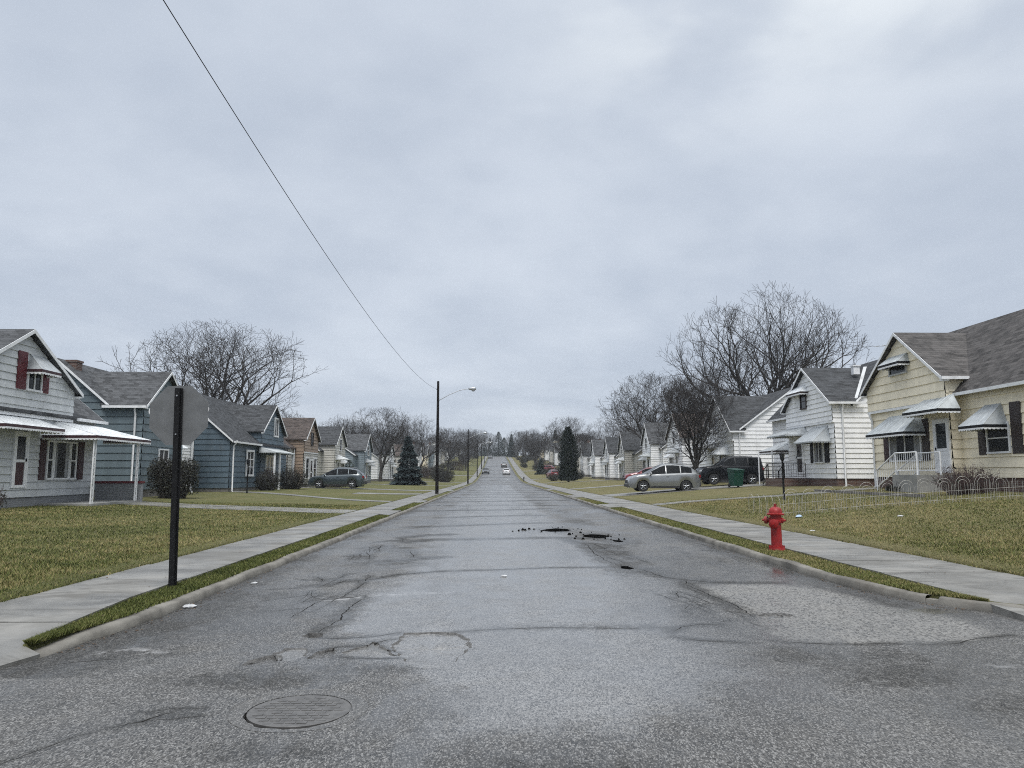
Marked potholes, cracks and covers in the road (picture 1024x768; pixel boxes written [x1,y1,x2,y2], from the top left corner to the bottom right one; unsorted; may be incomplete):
manhole cover [226,689,370,733]
crack [272,500,632,659]
